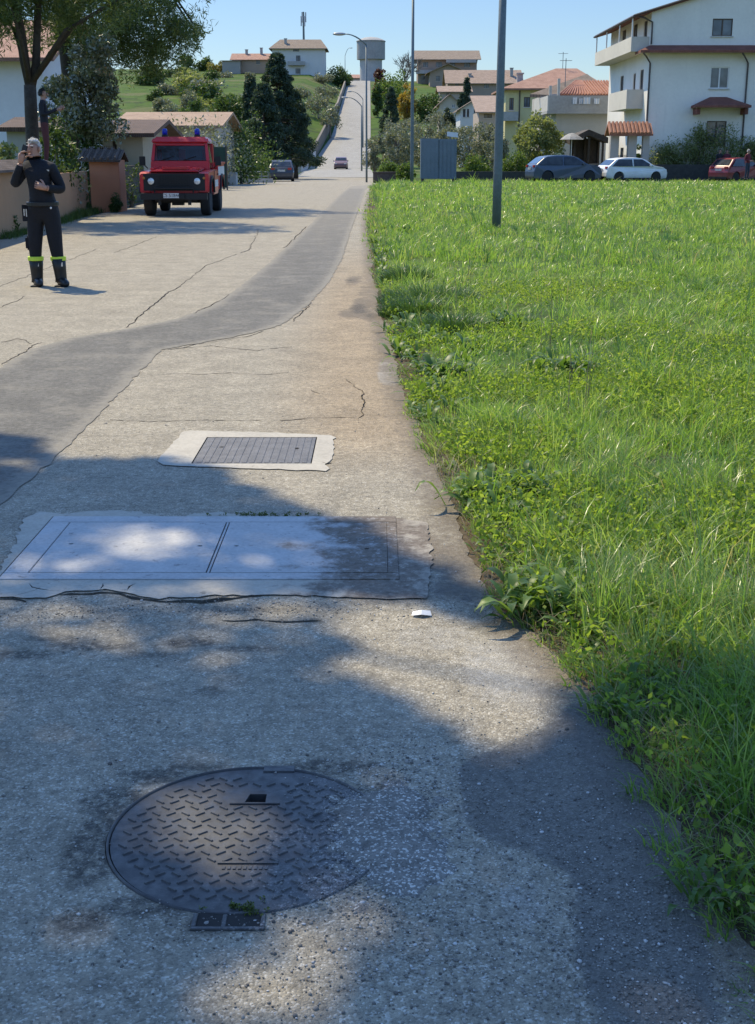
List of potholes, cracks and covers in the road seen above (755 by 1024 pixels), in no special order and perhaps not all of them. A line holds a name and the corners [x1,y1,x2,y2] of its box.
crack [127,233,258,327]
crack [119,381,366,422]
manhole cover [0,510,434,599]
crack [168,331,284,351]
manhole cover [106,766,370,931]
crack [61,585,319,623]
